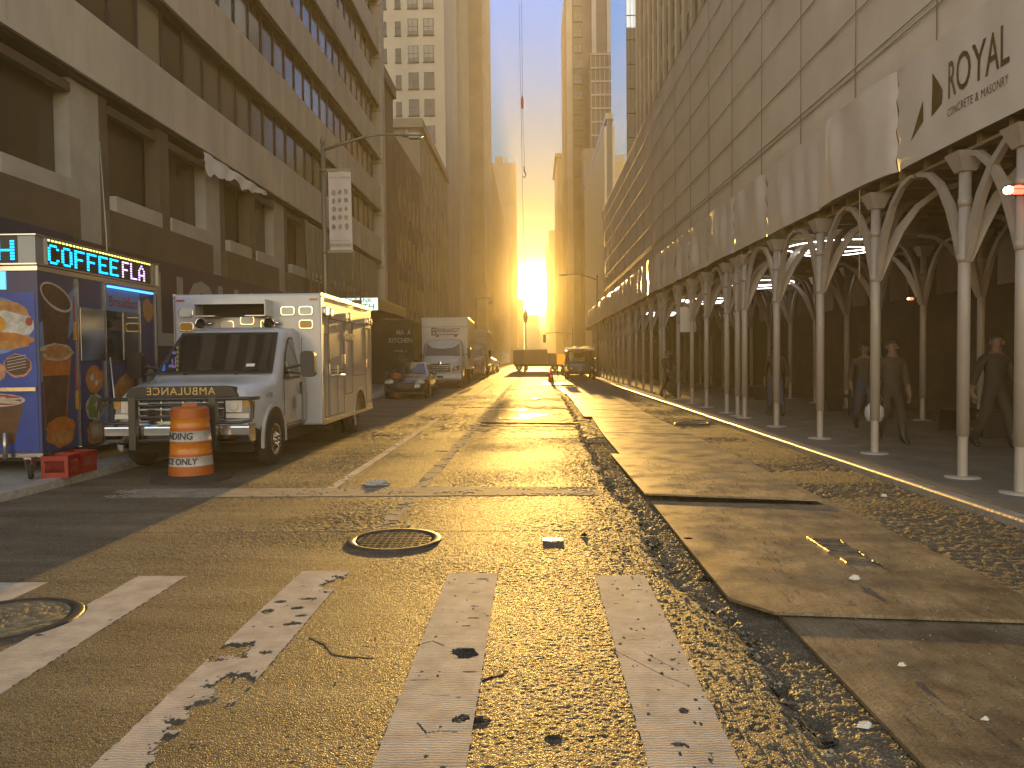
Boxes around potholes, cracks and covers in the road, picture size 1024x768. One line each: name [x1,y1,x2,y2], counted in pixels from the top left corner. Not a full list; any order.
crack [310,637,373,659]
manhole cover [346,528,442,552]
manhole cover [0,597,85,642]
